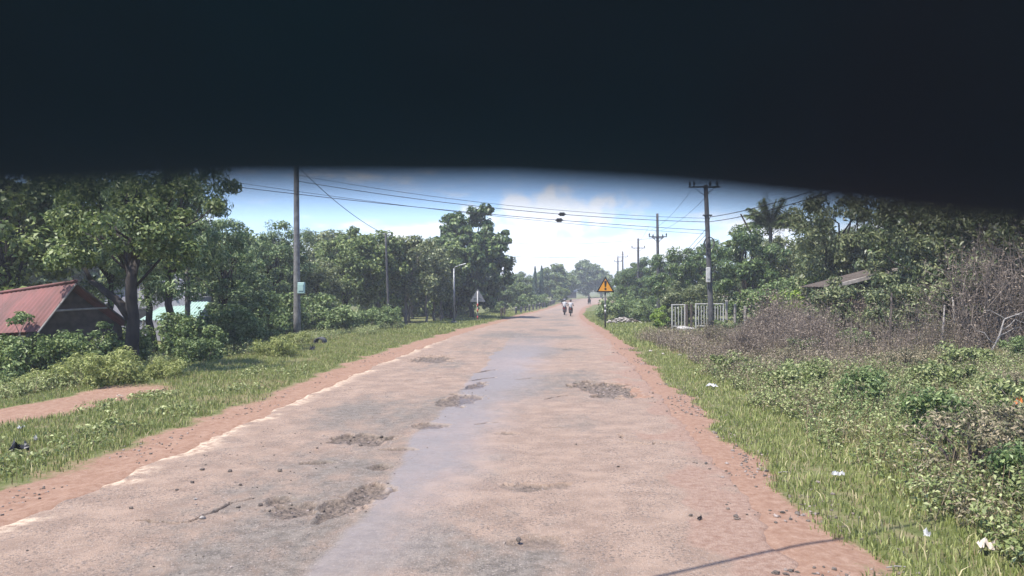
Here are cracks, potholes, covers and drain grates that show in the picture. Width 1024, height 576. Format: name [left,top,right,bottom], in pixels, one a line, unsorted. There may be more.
pothole [406,355,458,365]
pothole [433,390,492,409]
pothole [409,422,453,430]
pothole [497,481,585,494]
pothole [319,432,405,447]
pothole [261,494,303,507]
pothole [459,381,490,390]
pothole [298,482,402,530]
pothole [258,500,325,521]
pothole [563,378,656,402]
